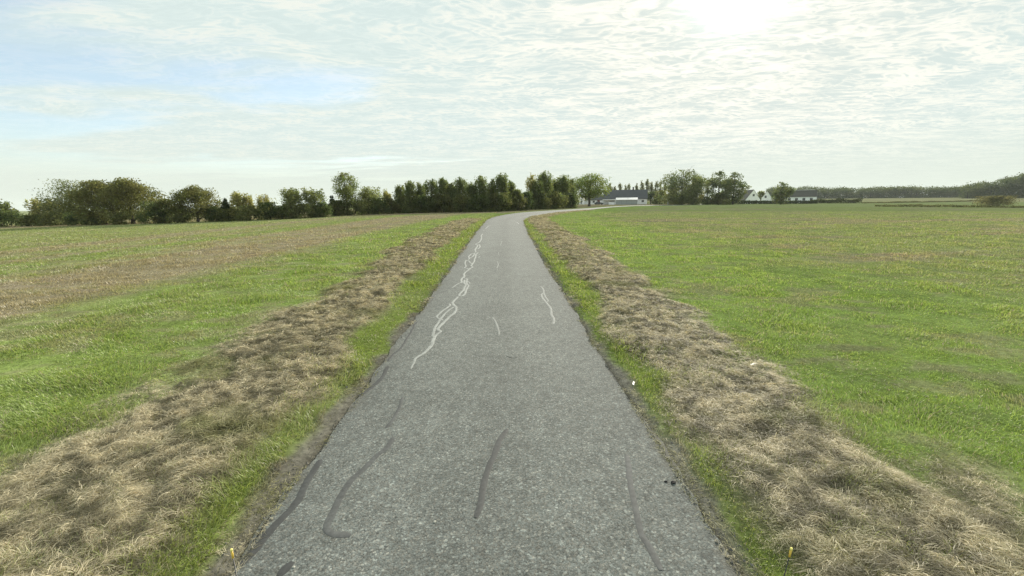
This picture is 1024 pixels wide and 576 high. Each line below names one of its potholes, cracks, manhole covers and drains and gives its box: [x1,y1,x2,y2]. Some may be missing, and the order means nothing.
crack [388,234,502,369]
